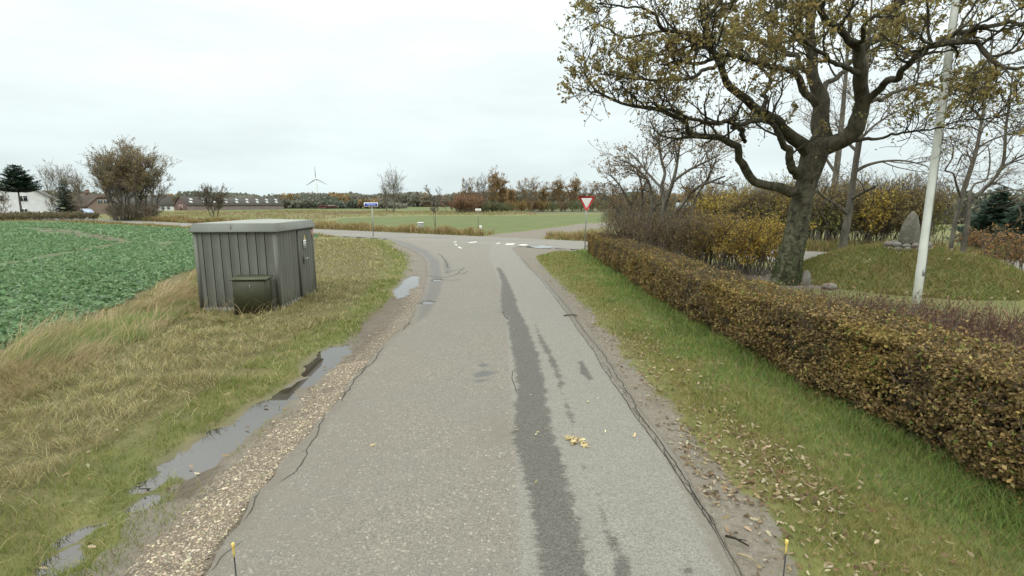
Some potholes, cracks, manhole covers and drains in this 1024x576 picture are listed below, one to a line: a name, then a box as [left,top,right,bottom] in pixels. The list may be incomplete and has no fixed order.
crack [283,418,324,480]
crack [341,348,383,401]
